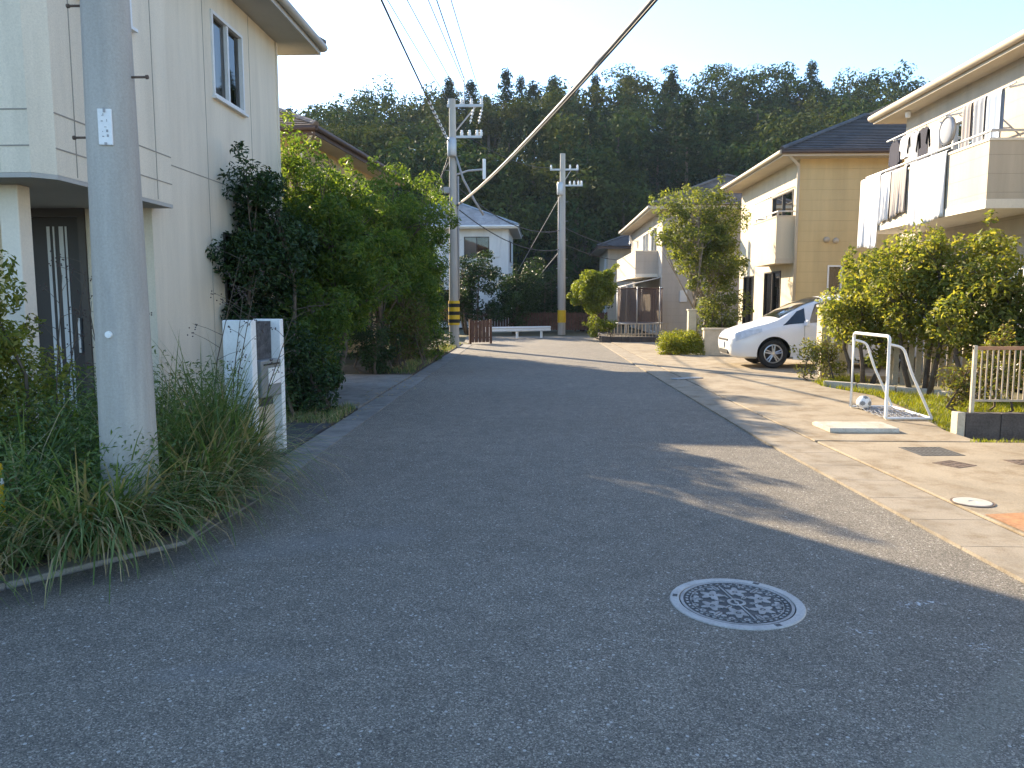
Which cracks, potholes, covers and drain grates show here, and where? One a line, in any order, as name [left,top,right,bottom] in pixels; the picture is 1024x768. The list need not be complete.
drain grate [898,447,966,456]
manhole cover [670,578,806,631]
utility cover [950,497,996,508]
